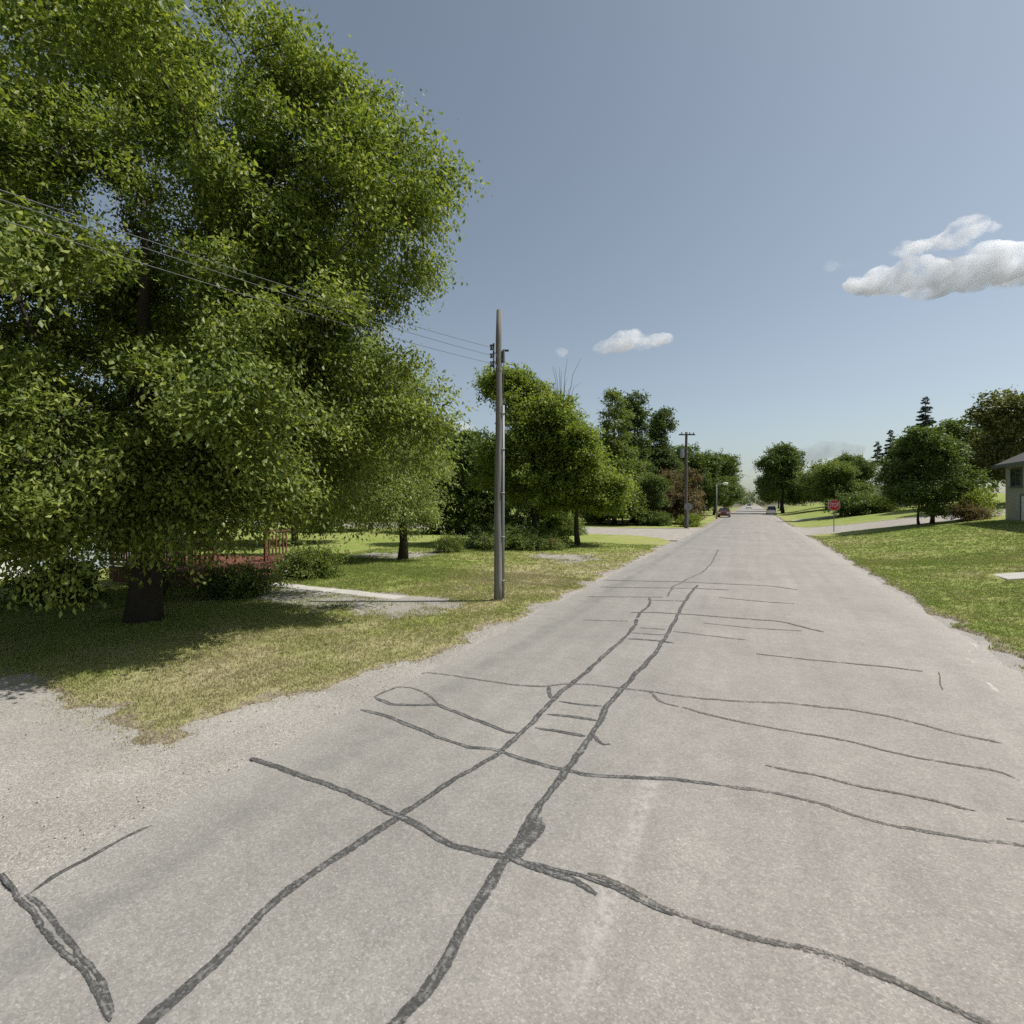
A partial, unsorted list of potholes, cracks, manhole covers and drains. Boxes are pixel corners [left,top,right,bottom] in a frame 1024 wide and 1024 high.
crack [587,580,943,690]
crack [422,672,1024,822]
